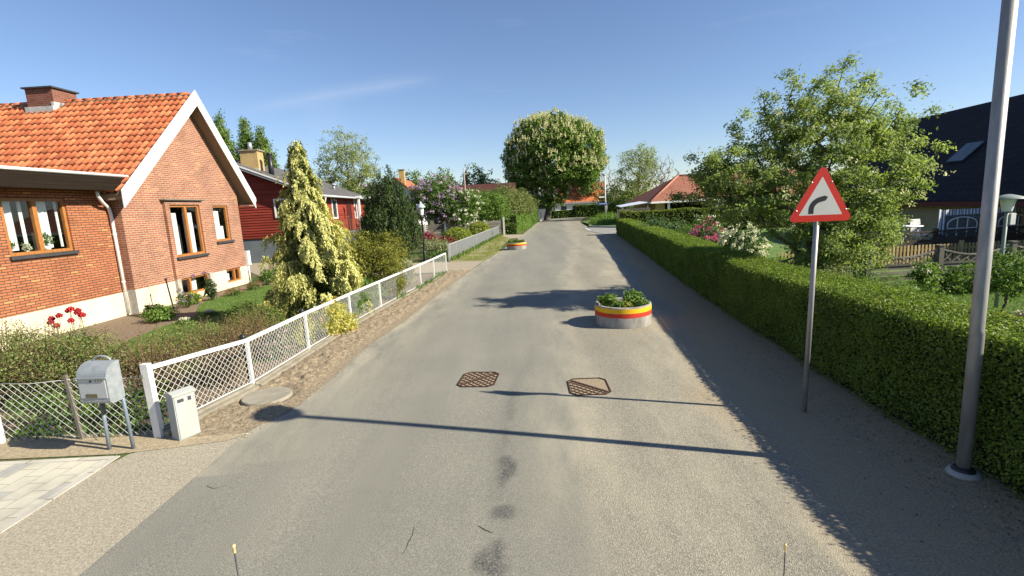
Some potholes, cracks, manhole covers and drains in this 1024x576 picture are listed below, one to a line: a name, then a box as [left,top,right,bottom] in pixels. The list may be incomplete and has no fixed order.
manhole cover [241,387,292,407]
